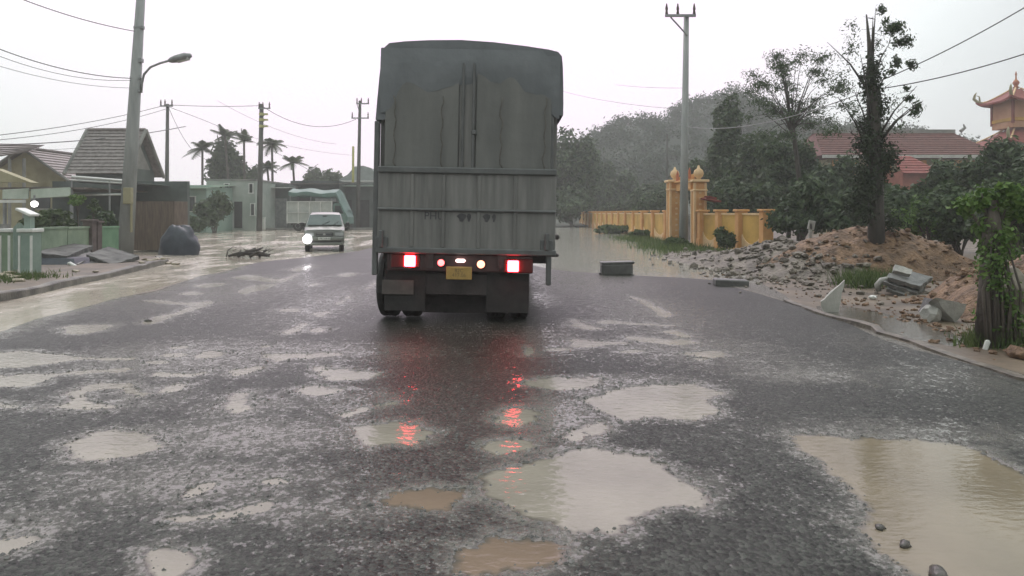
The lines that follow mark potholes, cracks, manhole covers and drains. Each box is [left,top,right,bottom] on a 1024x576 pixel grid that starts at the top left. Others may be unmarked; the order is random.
pothole [520,375,605,391]
pothole [347,420,439,448]
pothole [311,365,384,381]
pothole [786,432,1024,576]
pothole [476,444,716,536]
pothole [217,391,257,415]
pothole [59,427,172,463]
pothole [576,382,729,422]
pothole [0,350,138,368]
pothole [478,437,540,456]
pothole [140,545,200,576]
pothole [379,485,469,513]
